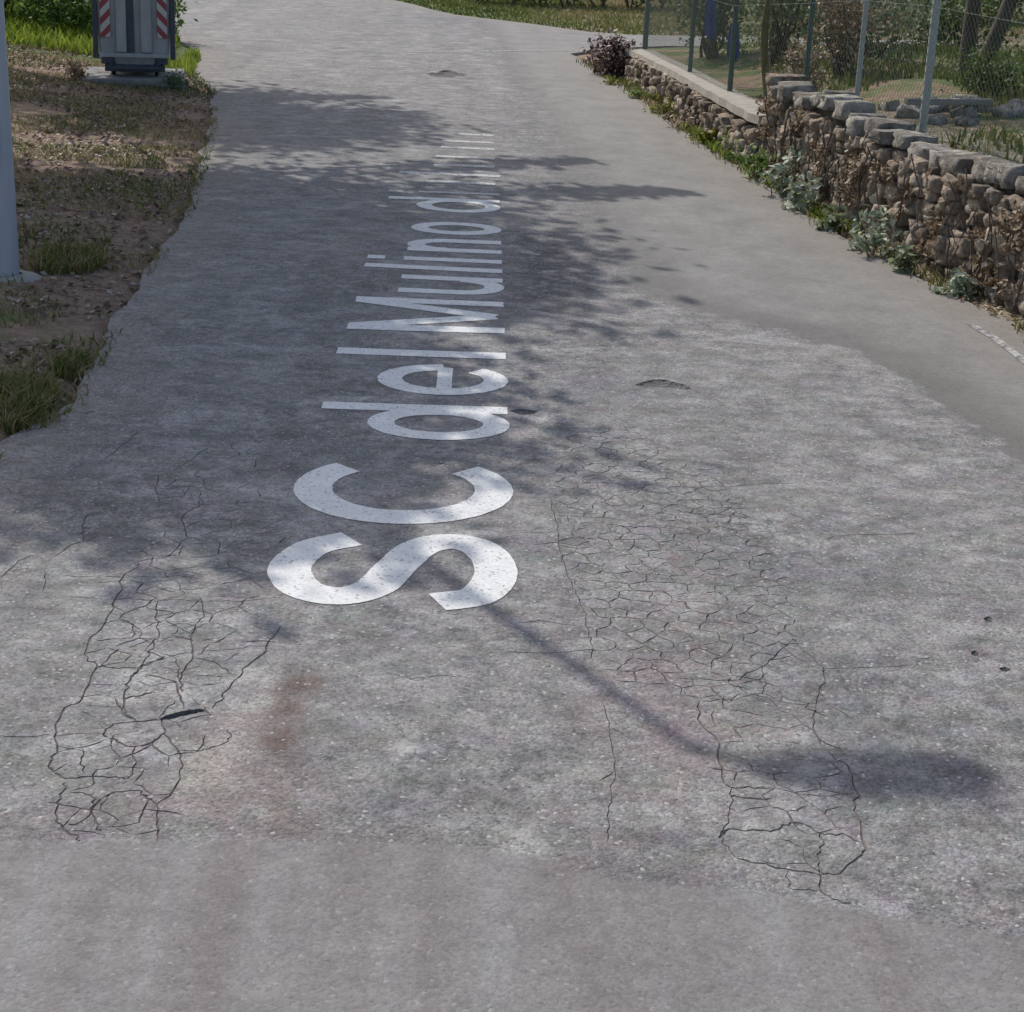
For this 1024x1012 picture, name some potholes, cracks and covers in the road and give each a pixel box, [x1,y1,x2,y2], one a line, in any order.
crack [506,424,910,905]
pothole [635,379,692,389]
pothole [427,70,466,78]
crack [0,442,285,842]
pothole [158,709,205,721]
